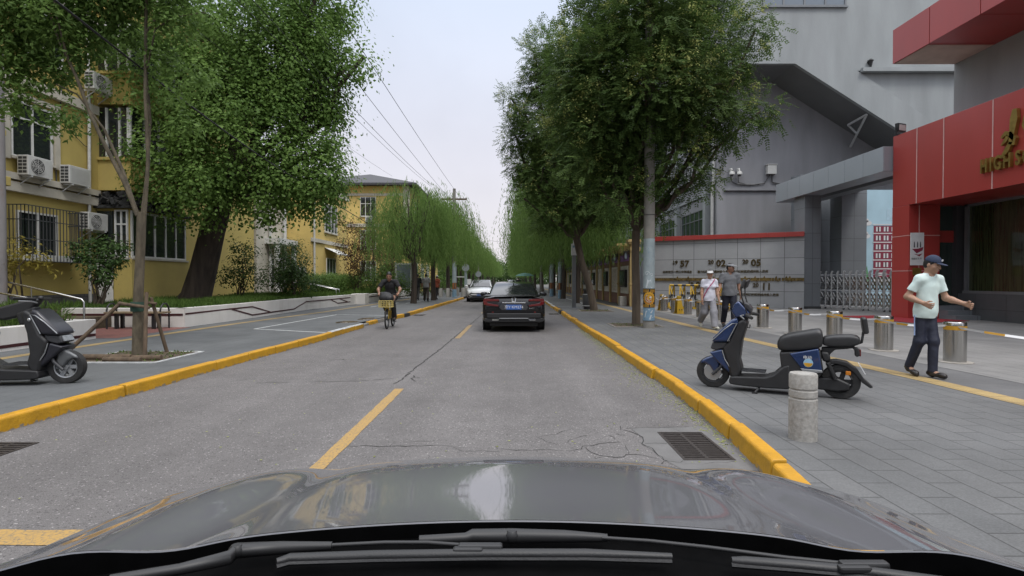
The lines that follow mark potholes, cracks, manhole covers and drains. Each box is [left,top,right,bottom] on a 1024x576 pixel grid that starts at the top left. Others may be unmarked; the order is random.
crack [326,426,733,464]
drain grate [0,442,39,456]
crack [266,315,481,384]
drain grate [657,432,736,460]
